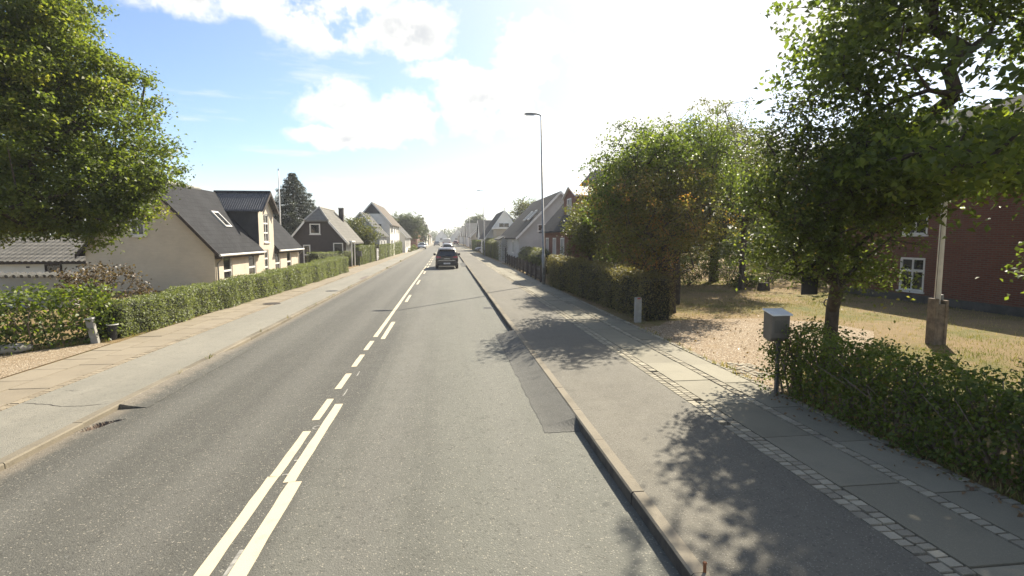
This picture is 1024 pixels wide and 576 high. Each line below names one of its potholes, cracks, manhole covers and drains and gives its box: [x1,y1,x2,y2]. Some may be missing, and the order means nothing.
pothole [78,418,127,433]
